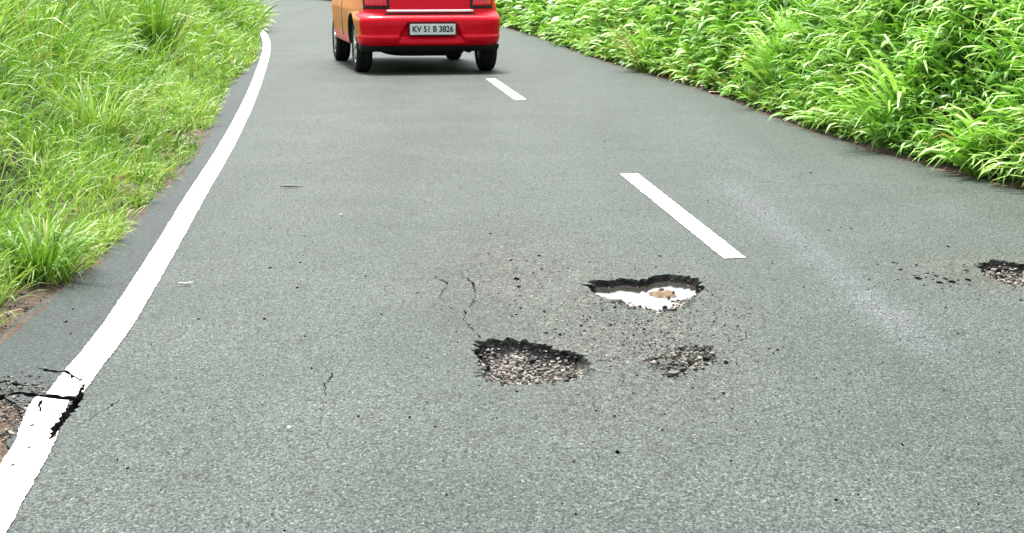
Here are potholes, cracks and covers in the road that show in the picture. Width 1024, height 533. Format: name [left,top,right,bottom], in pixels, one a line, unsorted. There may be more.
pothole [975,259,1024,287]
pothole [471,337,597,387]
crack [0,368,120,440]
pothole [582,273,706,314]
pothole [642,345,722,380]
crack [435,275,481,338]
